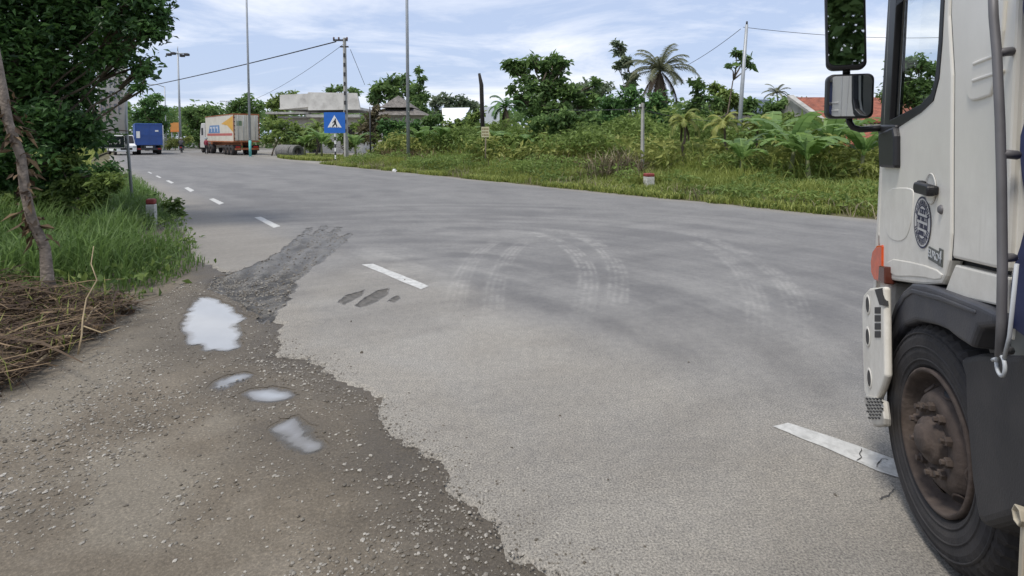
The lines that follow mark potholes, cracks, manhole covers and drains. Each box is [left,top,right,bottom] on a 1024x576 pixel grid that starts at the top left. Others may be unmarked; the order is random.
pothole [266,414,330,455]
pothole [192,371,256,395]
pothole [178,295,259,352]
pothole [239,385,300,403]
